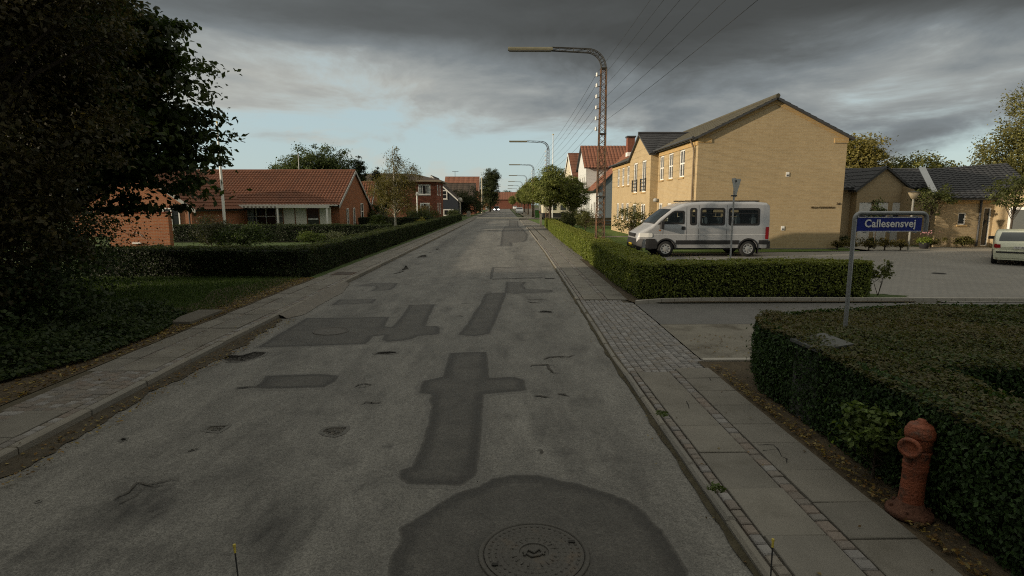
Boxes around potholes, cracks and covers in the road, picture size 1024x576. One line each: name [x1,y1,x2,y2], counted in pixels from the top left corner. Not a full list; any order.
manhole cover [478,522,590,576]
crack [114,479,174,503]
crack [531,355,573,373]
pothole [220,351,269,363]
pothole [200,424,232,433]
pothole [319,426,350,437]
